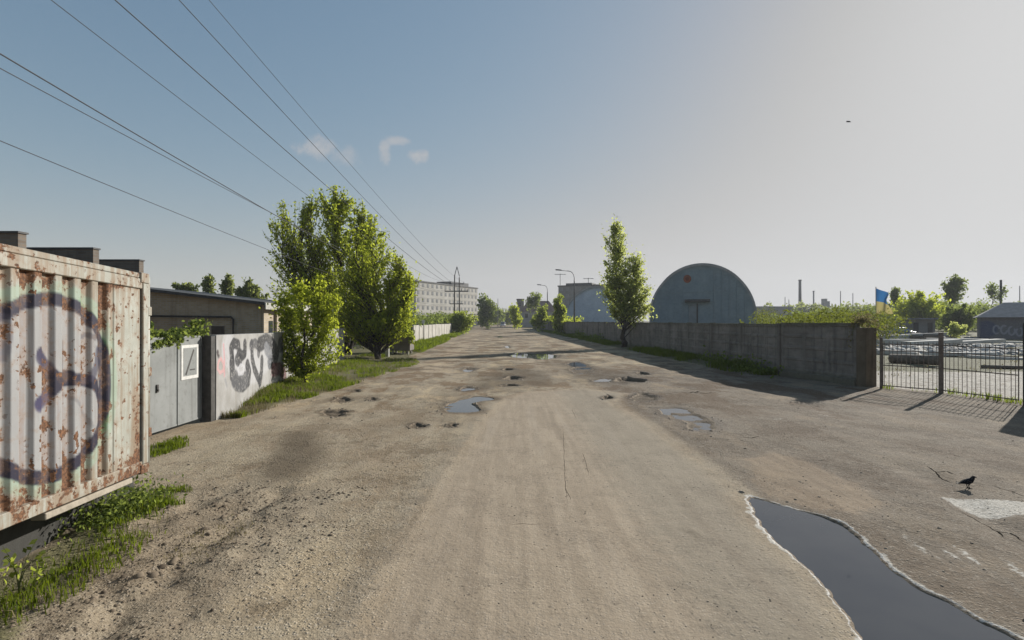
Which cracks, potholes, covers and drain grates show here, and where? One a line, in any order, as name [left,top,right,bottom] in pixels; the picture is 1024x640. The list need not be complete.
crack [958,510,1024,542]
pothole [745,496,1024,640]
pothole [658,408,717,431]
pothole [443,396,494,413]
pothole [566,361,594,374]
